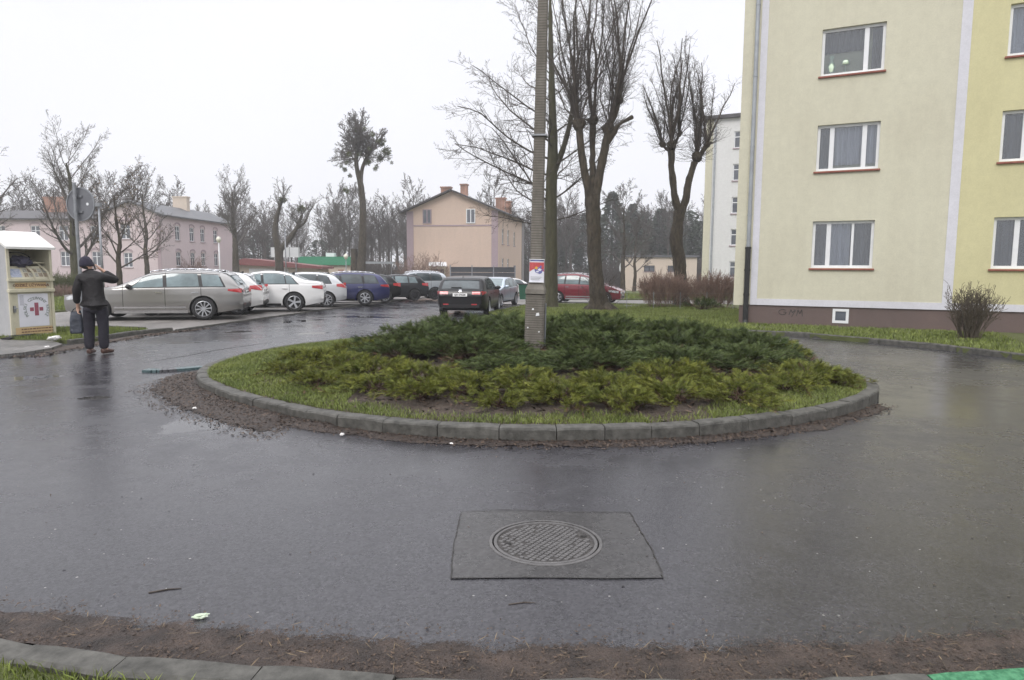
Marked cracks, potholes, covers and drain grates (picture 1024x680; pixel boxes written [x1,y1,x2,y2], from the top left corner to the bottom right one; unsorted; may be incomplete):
manhole cover [489,520,603,566]
